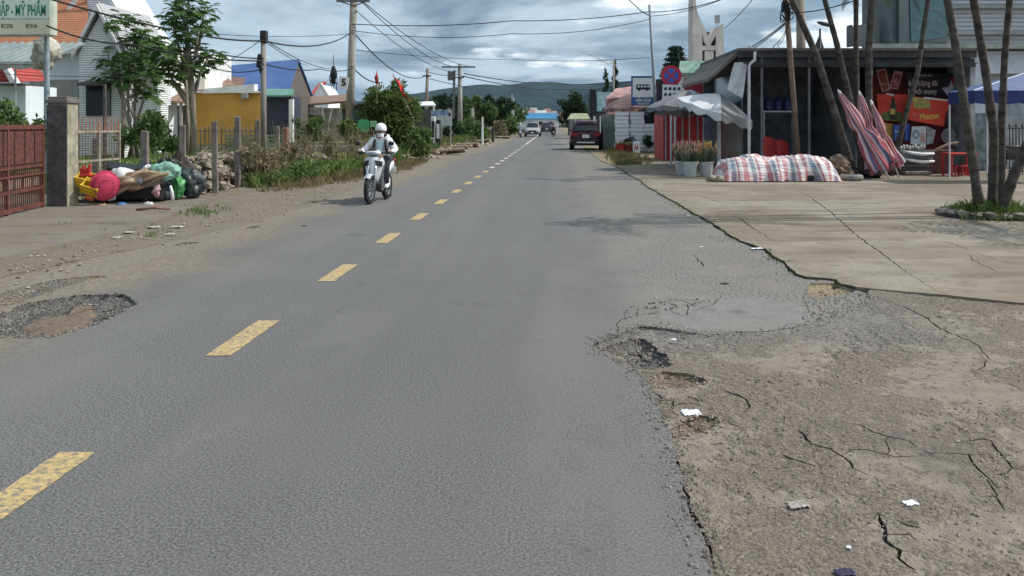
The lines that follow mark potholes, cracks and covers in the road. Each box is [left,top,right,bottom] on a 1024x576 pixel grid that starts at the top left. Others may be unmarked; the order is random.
crack [873,513,920,570]
pothole [649,371,708,389]
crack [780,298,1023,511]
pothole [597,337,674,370]
pothole [0,292,139,339]
crack [676,458,714,566]
crack [586,297,721,344]
pothole [672,413,723,437]
crack [658,389,751,413]
